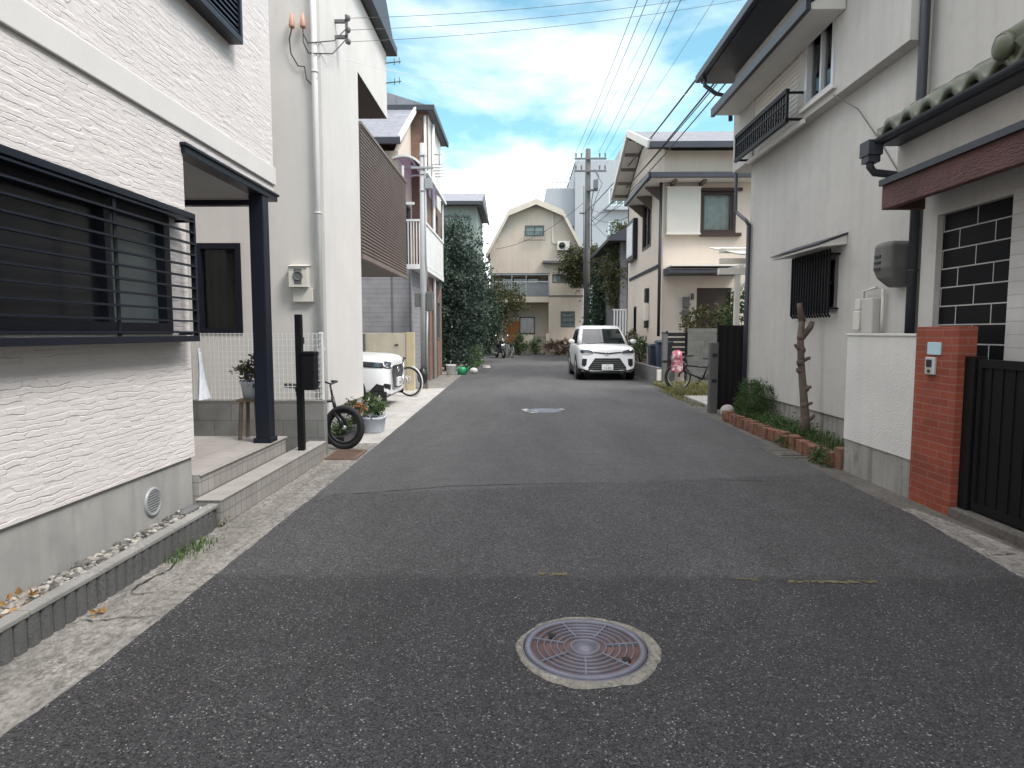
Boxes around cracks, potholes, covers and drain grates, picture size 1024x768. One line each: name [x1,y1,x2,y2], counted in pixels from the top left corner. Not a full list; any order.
crack [131,557,179,594]
manhole cover [515,617,662,689]
